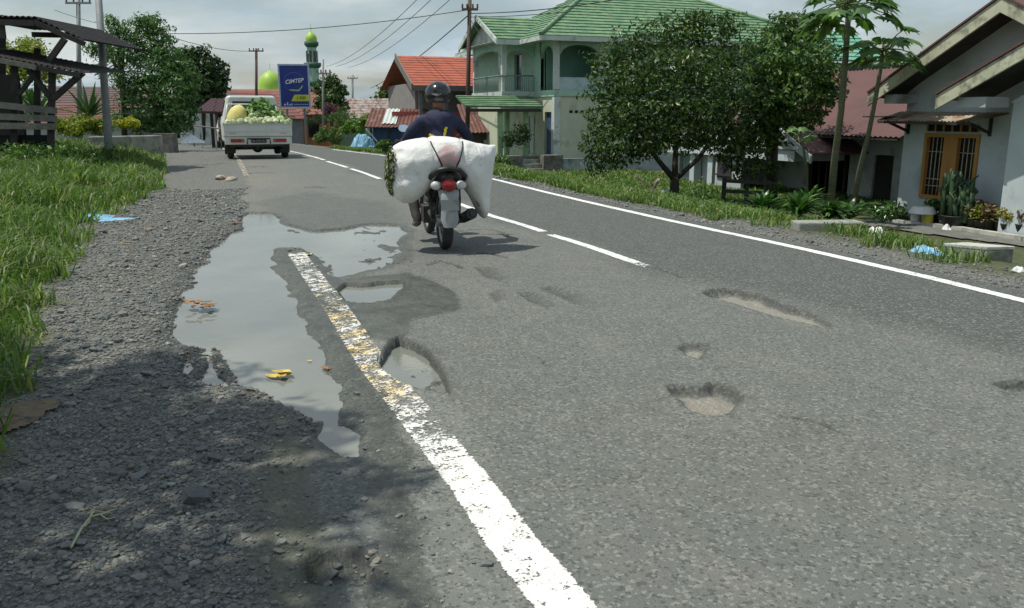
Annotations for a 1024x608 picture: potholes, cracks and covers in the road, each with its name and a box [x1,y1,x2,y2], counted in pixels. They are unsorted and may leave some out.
pothole [1001,381,1024,394]
pothole [668,383,742,416]
pothole [159,213,407,457]
pothole [708,289,831,329]
pothole [475,267,507,281]
pothole [521,294,554,307]
pothole [683,345,707,359]
pothole [543,287,582,304]
pothole [380,339,449,393]
